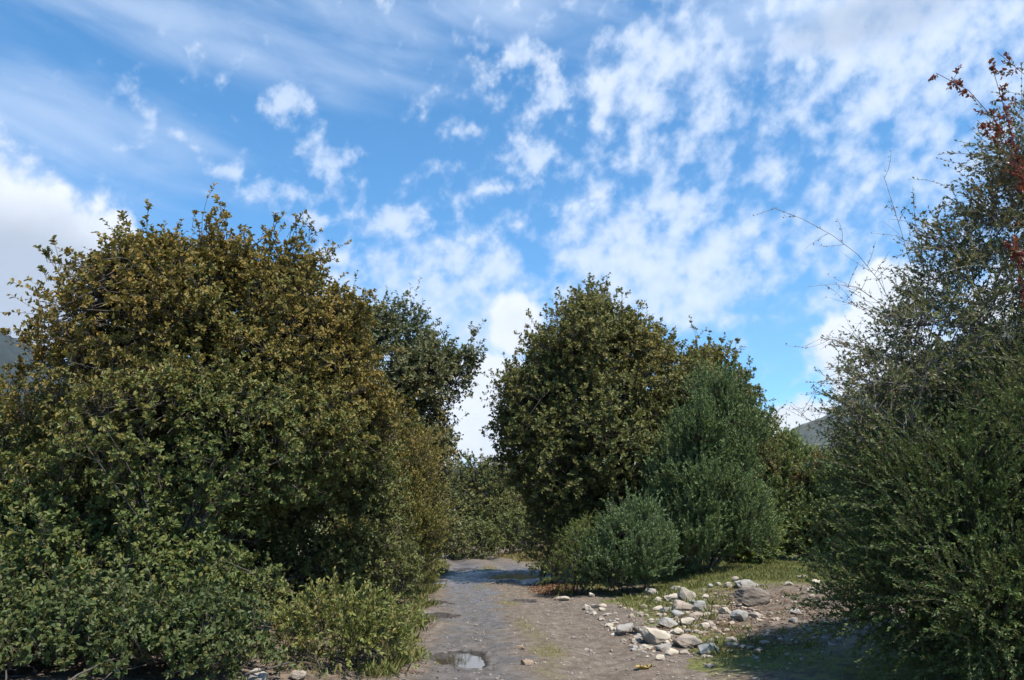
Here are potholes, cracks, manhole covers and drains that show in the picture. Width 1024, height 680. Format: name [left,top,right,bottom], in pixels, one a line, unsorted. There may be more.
pothole [421,647,494,670]
pothole [472,569,553,581]
